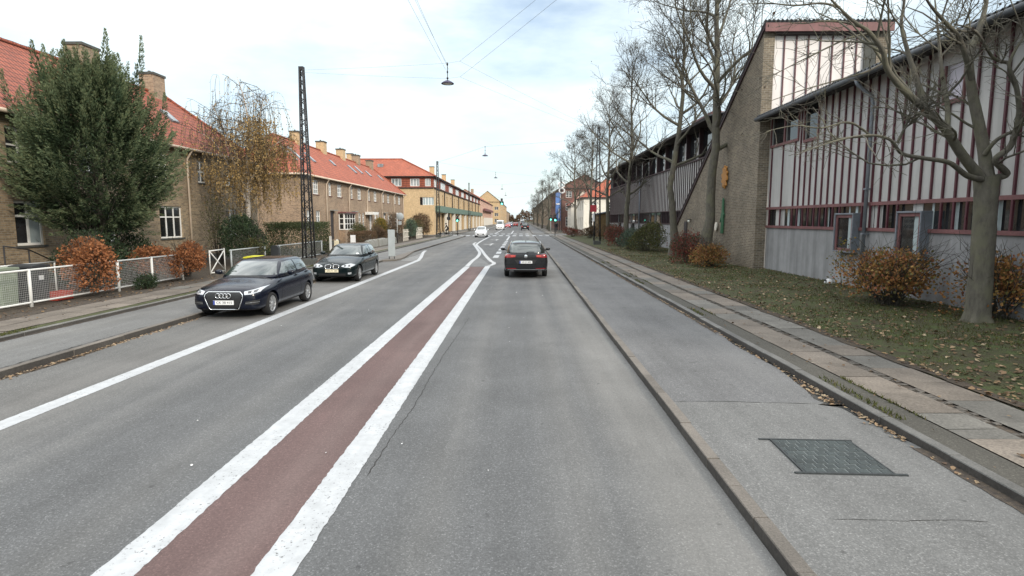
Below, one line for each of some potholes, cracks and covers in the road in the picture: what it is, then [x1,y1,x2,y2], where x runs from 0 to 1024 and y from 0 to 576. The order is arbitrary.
manhole cover [758,438,909,476]
